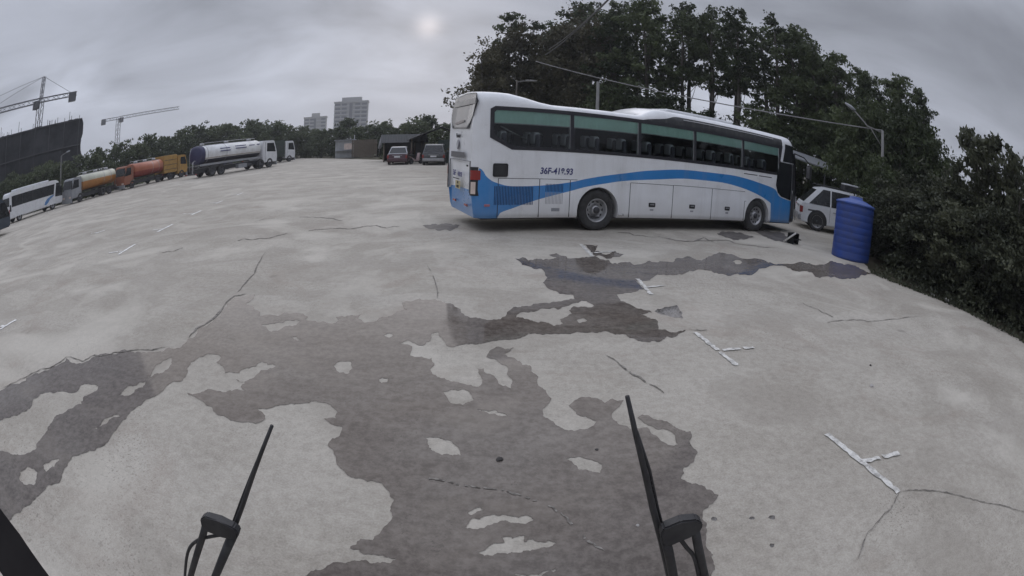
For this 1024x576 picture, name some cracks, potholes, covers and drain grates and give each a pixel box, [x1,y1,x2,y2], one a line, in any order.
crack [162,217,399,337]
crack [858,489,1020,559]
crack [607,355,664,393]
crack [429,478,605,551]
